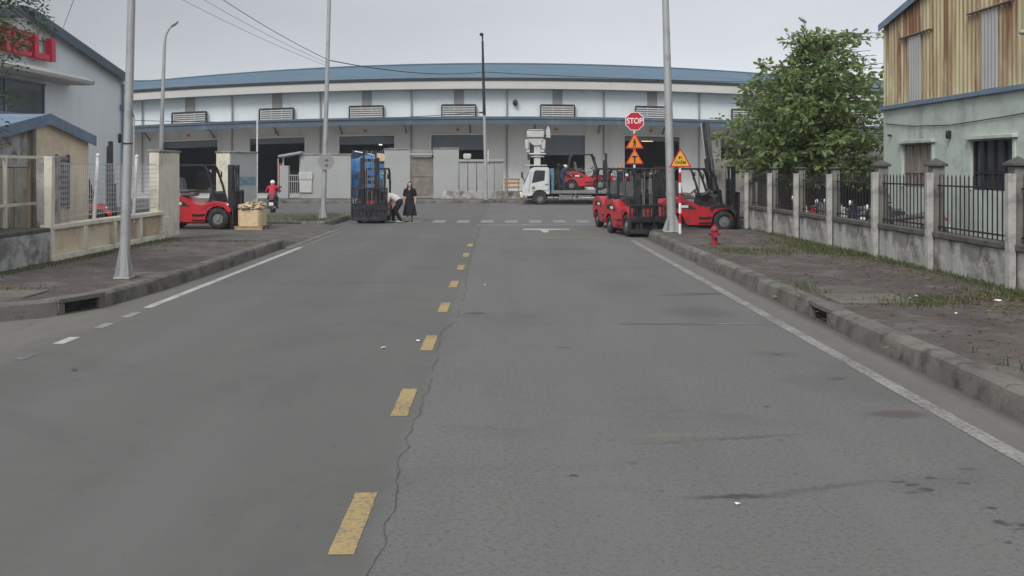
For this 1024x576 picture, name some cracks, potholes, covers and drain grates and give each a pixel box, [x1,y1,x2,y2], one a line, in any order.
drain grate [808,300,847,326]
drain grate [47,291,105,316]
